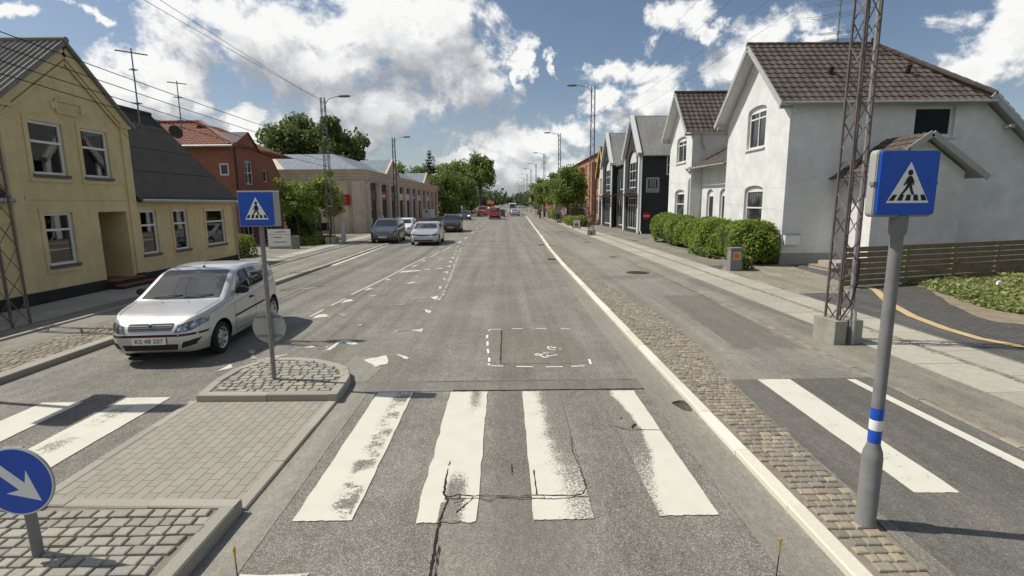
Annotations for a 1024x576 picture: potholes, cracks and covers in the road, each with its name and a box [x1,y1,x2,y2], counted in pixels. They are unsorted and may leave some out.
crack [429,436,589,576]
pothole [672,400,692,412]
